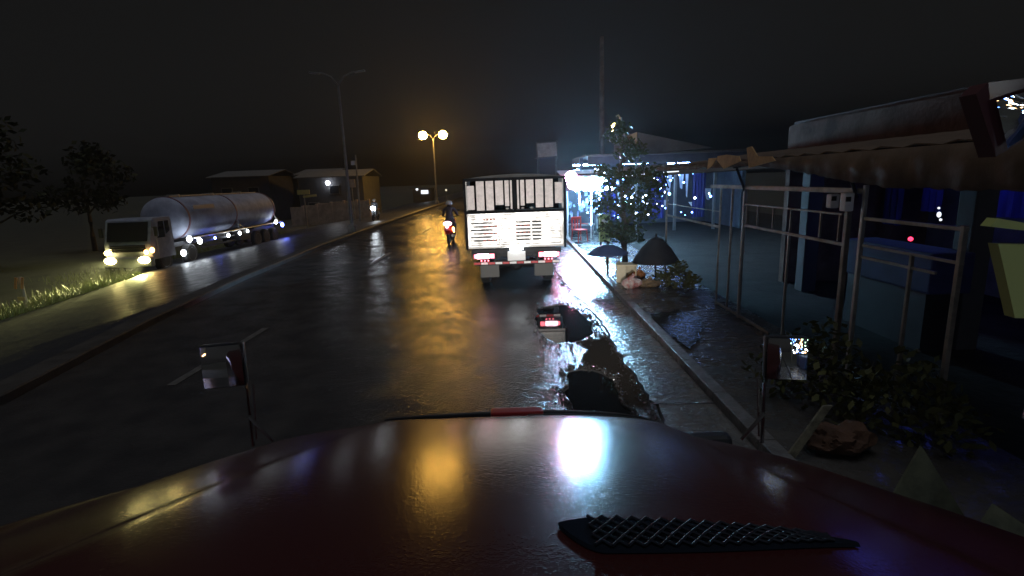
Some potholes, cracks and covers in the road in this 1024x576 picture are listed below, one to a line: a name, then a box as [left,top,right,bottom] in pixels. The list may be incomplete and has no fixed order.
pothole [563,369,633,415]
pothole [534,304,594,344]
